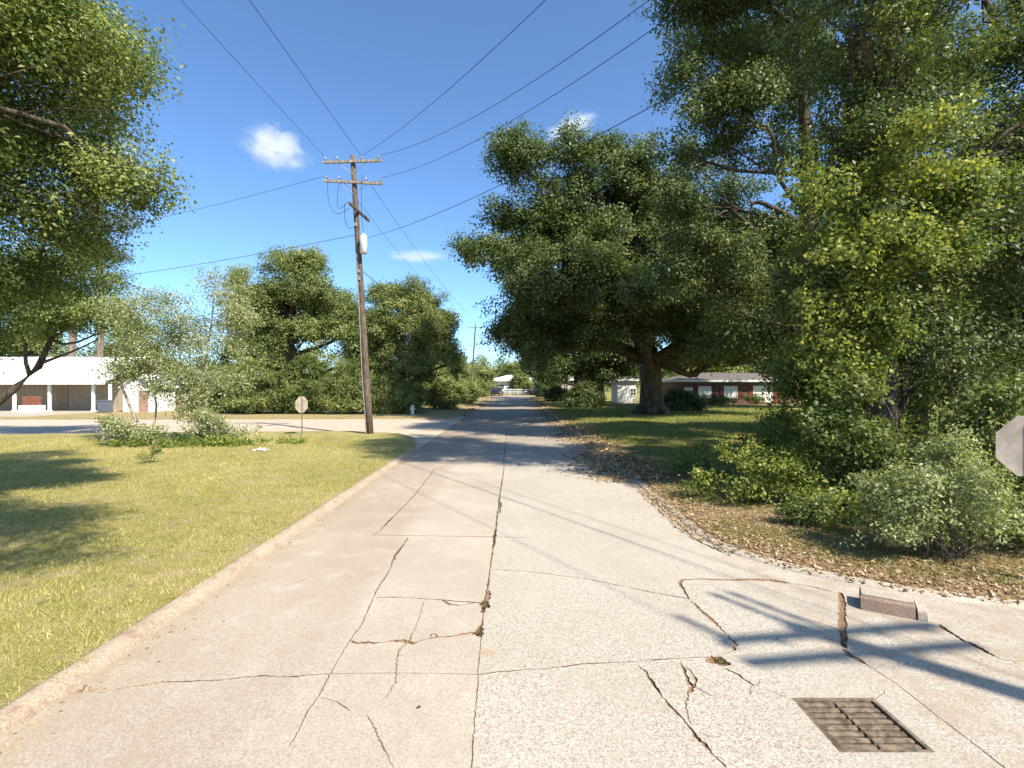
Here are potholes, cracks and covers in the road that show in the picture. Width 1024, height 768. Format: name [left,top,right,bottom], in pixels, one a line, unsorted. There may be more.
crack [938,624,1024,662]
crack [350,597,483,768]
drain grate [792,698,934,752]
crack [478,569,832,768]
